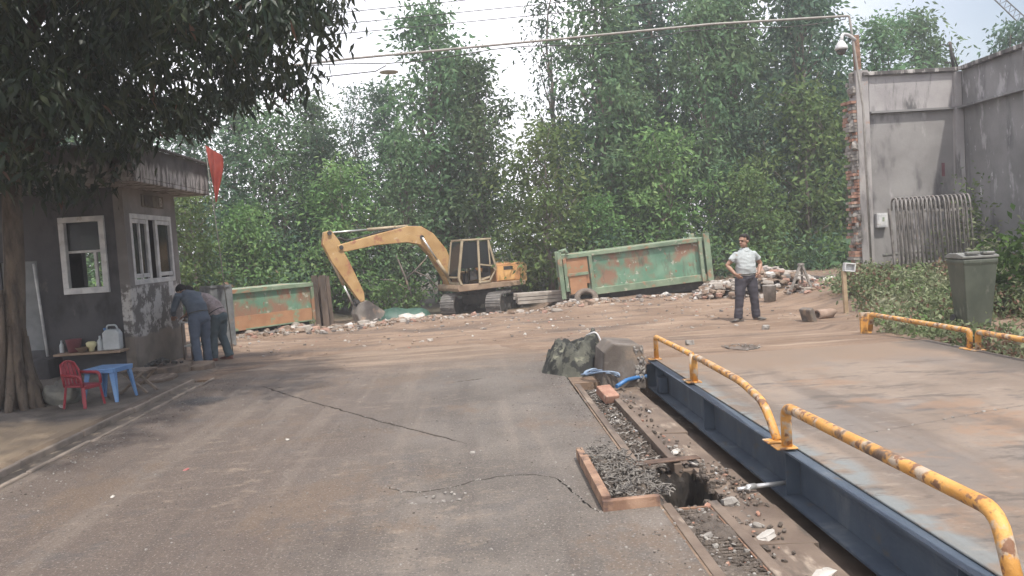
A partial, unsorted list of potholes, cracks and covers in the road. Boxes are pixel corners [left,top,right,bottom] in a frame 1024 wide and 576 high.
crack [265,387,467,444]
crack [385,474,603,513]
